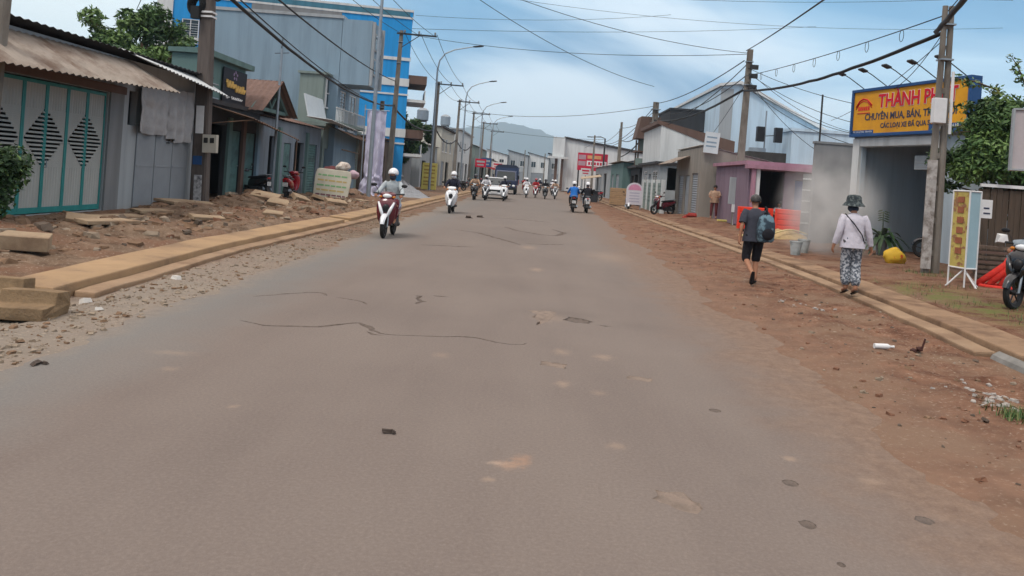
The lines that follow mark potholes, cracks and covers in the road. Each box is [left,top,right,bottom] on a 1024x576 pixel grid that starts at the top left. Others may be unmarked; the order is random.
crack [415,295,445,304]
crack [432,218,566,247]
pothole [914,516,935,525]
crack [241,320,526,345]
pothole [798,520,817,530]
crack [262,292,367,304]
